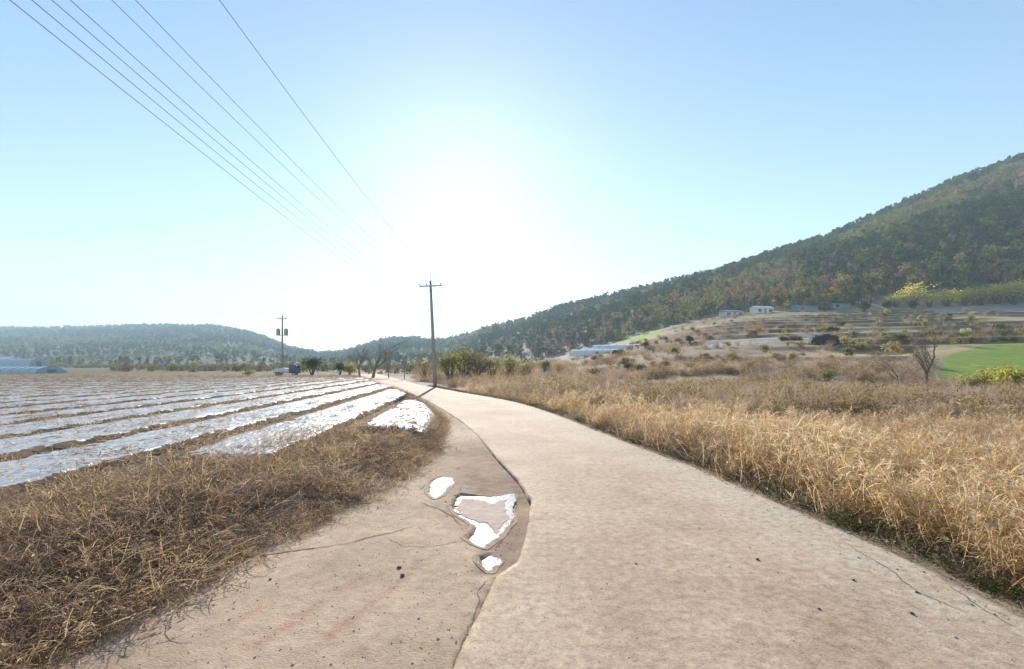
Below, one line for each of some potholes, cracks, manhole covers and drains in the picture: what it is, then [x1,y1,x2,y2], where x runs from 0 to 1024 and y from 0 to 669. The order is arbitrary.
crack [146,479,464,587]
crack [452,577,493,669]
pothole [425,475,456,499]
pothole [446,492,518,550]
crack [851,546,959,609]
pothole [472,550,504,574]
